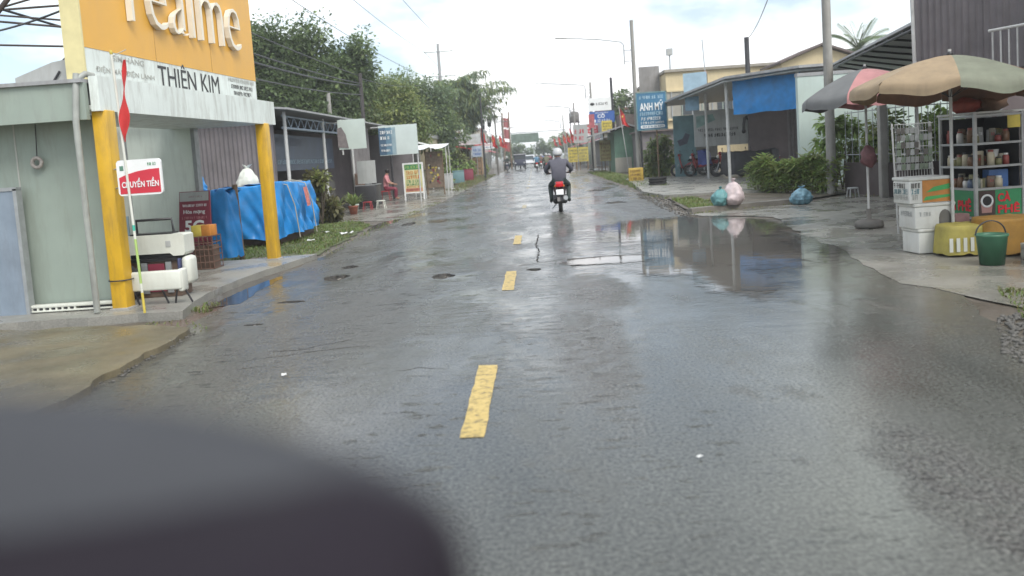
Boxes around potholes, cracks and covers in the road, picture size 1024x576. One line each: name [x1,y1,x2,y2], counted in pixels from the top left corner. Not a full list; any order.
crack [234,339,368,370]
